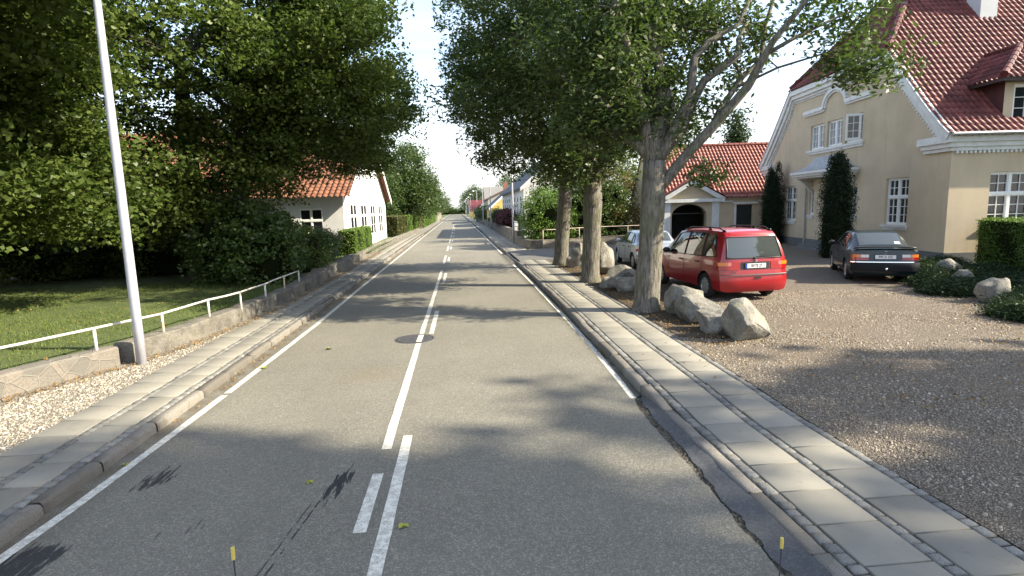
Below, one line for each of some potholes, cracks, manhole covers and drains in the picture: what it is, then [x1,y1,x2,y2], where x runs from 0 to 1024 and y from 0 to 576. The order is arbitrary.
manhole cover [395,334,435,344]
